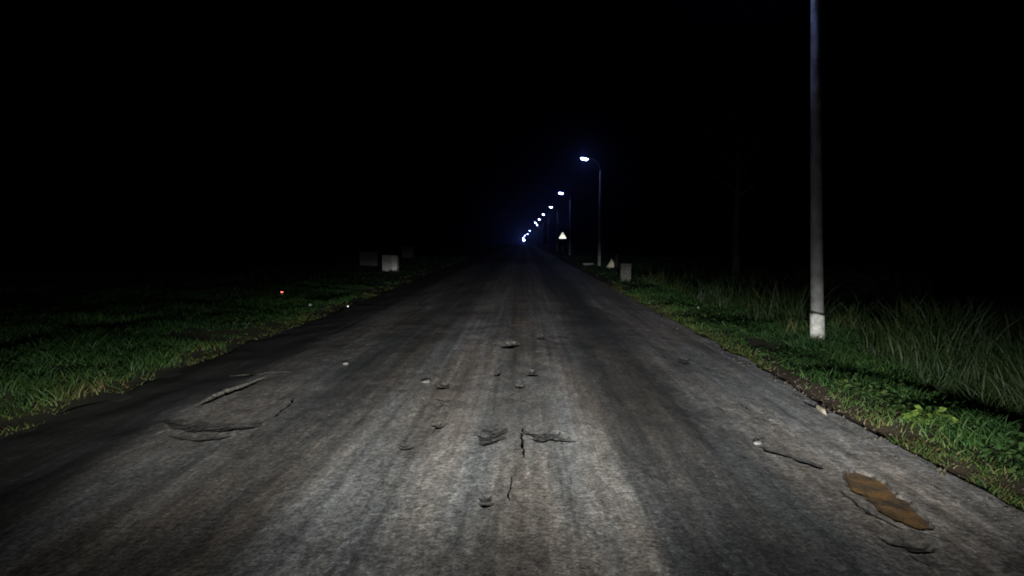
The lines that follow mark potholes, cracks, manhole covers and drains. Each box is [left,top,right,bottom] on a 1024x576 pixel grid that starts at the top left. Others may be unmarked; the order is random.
pothole [500,341,519,349]
pothole [474,425,509,446]
crack [757,445,826,469]
pothole [523,430,577,443]
pothole [478,494,494,508]
